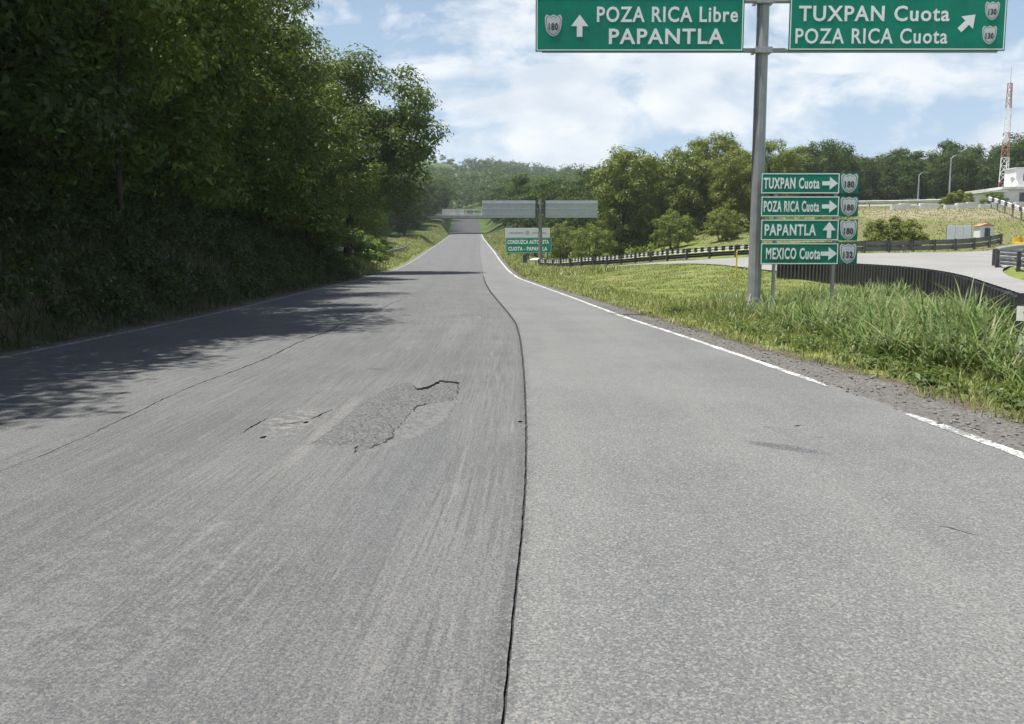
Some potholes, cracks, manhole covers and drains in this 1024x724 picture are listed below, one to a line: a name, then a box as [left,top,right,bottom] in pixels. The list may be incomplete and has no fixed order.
crack [245,409,332,432]
